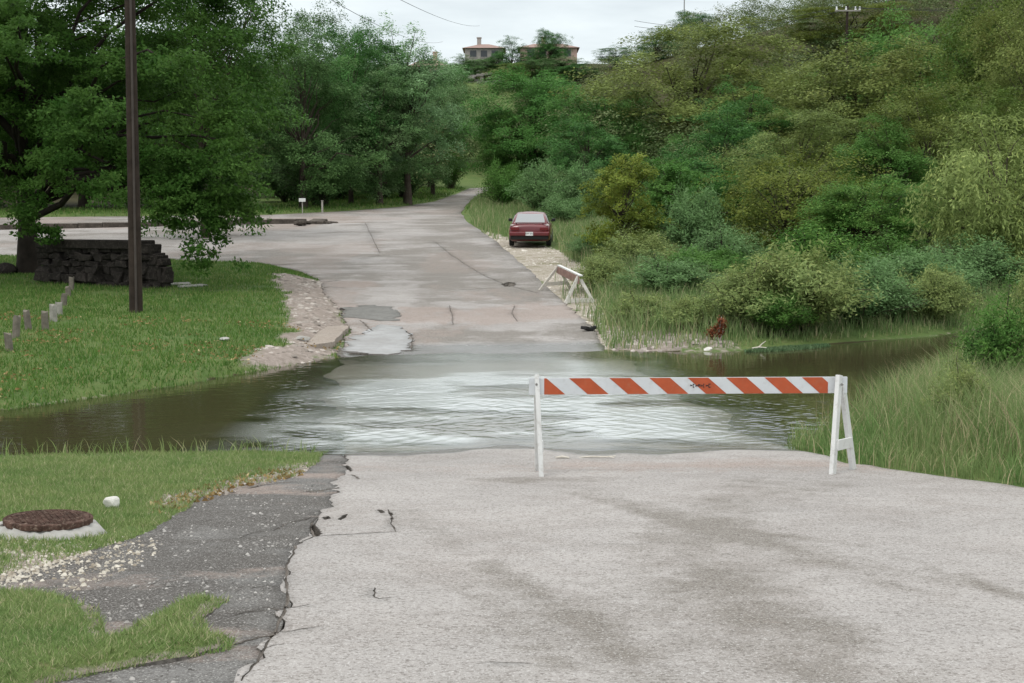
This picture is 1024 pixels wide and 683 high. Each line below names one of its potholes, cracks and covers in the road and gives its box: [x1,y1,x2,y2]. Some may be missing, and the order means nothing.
manhole cover [0,509,106,541]
crack [249,476,358,493]
